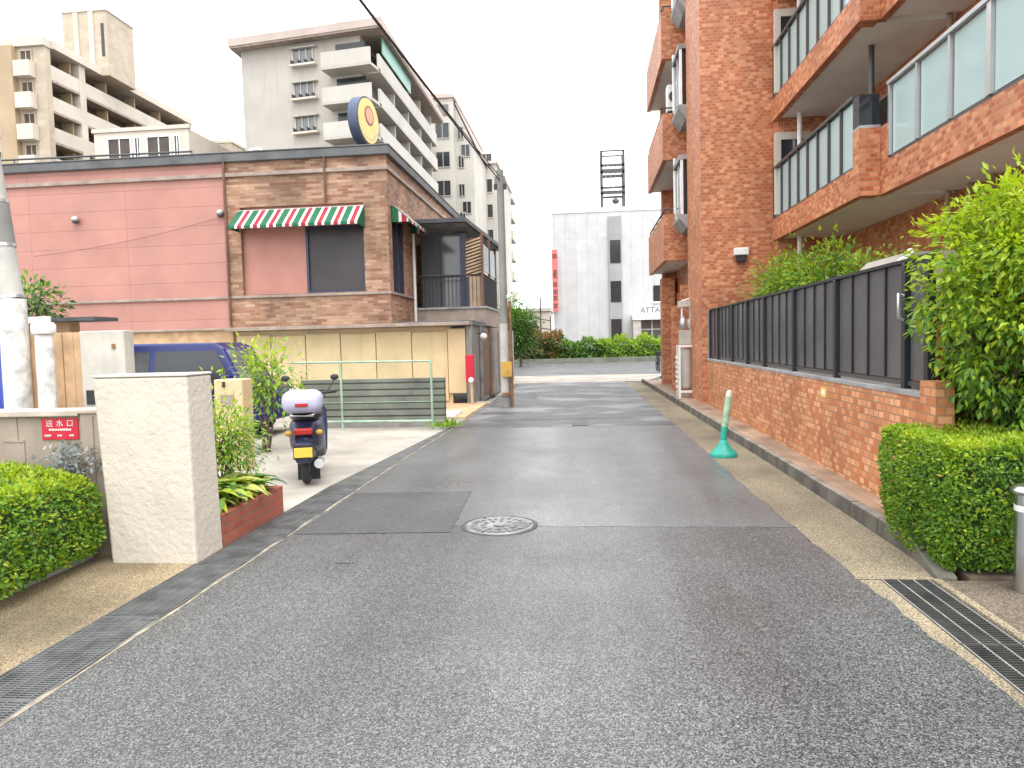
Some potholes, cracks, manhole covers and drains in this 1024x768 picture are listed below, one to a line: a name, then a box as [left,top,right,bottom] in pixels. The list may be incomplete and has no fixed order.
manhole cover [461,516,538,536]
drain grate [0,700,34,723]
drain grate [193,530,294,566]
drain grate [255,504,333,531]
drain grate [299,485,363,504]
drain grate [880,579,1024,645]
drain grate [0,617,160,700]
drain grate [960,644,1024,696]
drain grate [102,565,240,618]
